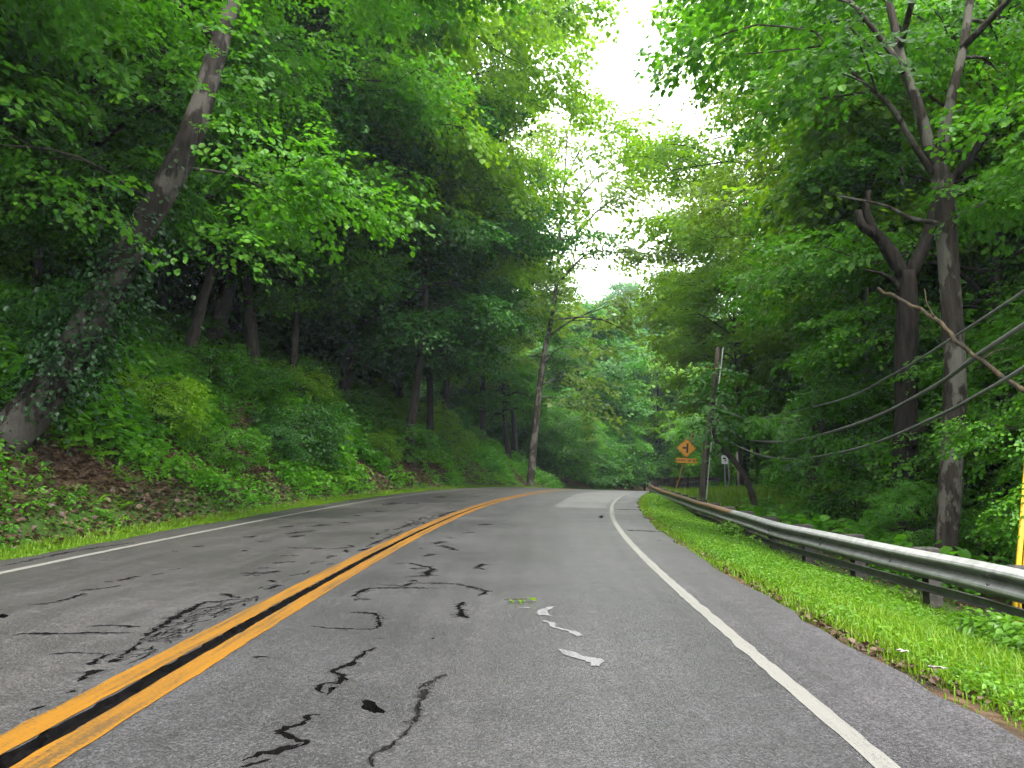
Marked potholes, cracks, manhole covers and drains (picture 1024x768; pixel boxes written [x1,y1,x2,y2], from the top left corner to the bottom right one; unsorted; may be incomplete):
pothole [361,699,386,713]
crack [0,495,521,768]
